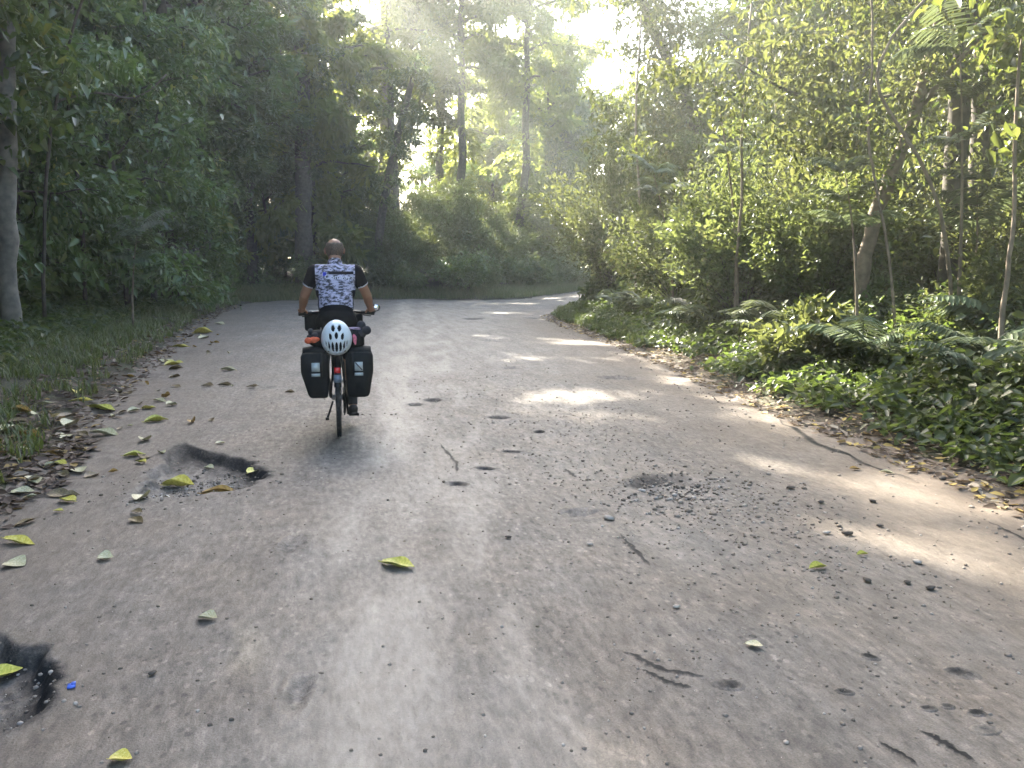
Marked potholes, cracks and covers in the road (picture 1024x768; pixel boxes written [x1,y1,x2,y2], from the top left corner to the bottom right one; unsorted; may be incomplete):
crack [622,650,703,688]
crack [620,533,650,565]
crack [439,443,459,473]
pothole [104,438,289,510]
crack [877,730,977,765]
pothole [0,623,85,758]
pothole [604,470,744,509]
crack [777,418,918,482]
